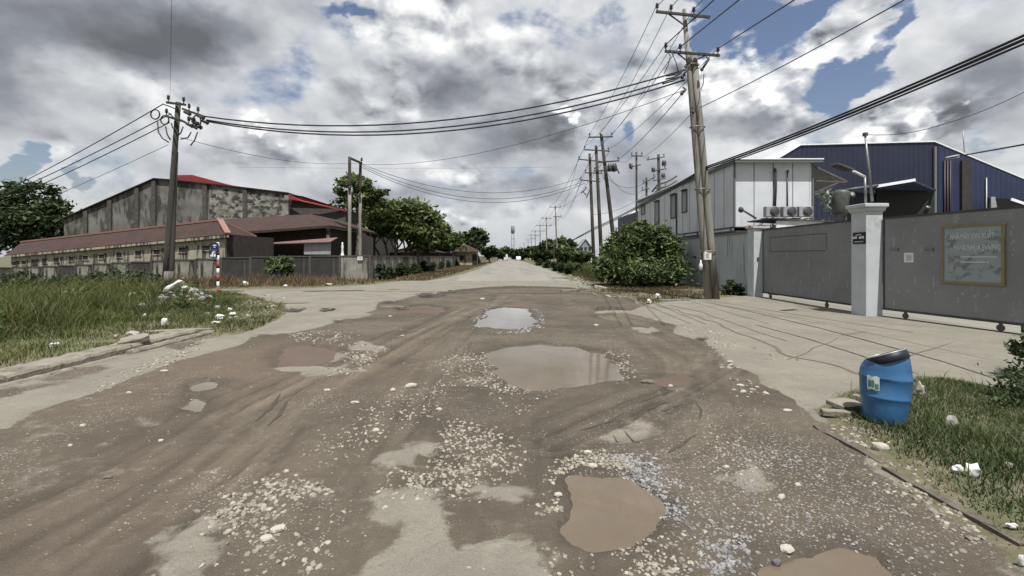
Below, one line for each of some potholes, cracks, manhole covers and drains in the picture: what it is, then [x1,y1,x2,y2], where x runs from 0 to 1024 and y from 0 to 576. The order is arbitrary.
pothole [185,378,224,392]
pothole [557,465,677,553]
pothole [478,342,630,391]
pothole [173,393,213,412]
pothole [474,307,539,330]
crack [658,305,867,374]
pothole [270,343,342,368]
